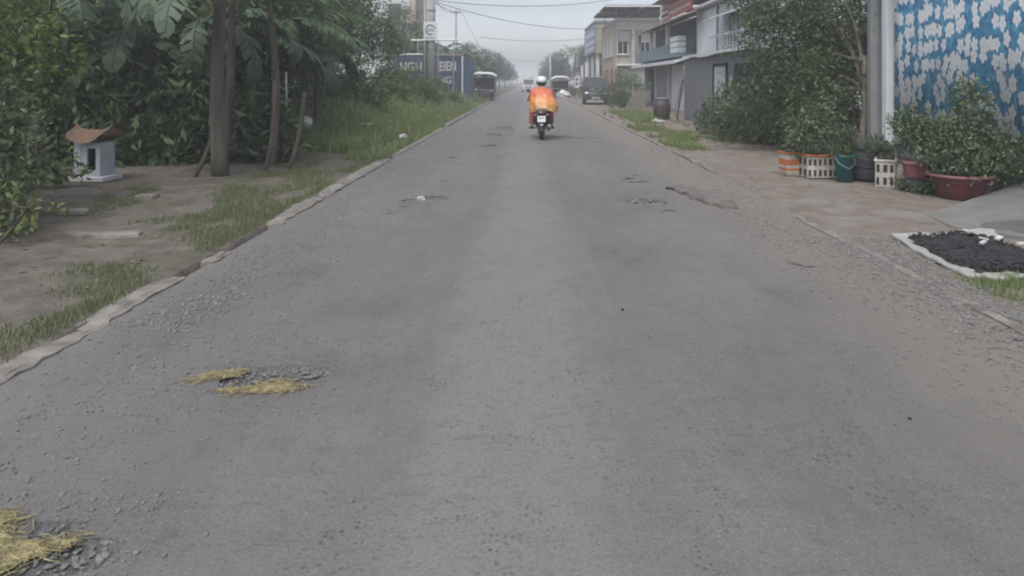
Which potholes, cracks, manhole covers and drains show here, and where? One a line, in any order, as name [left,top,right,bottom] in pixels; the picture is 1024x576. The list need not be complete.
pothole [218,364,335,392]
pothole [1,520,122,576]
